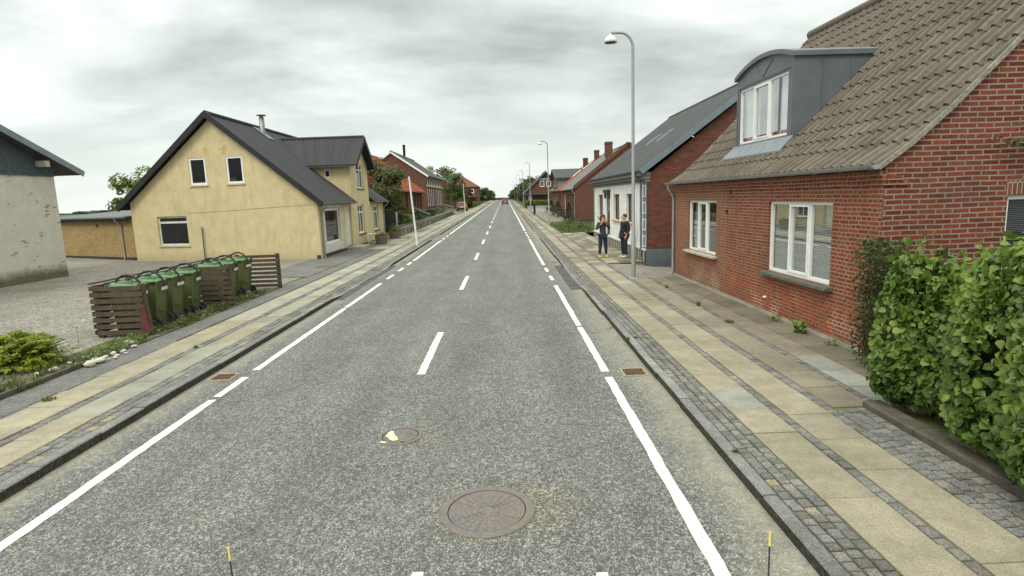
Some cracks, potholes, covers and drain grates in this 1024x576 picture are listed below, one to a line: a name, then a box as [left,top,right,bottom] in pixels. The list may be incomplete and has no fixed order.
manhole cover [439,486,535,538]
manhole cover [378,427,423,445]
